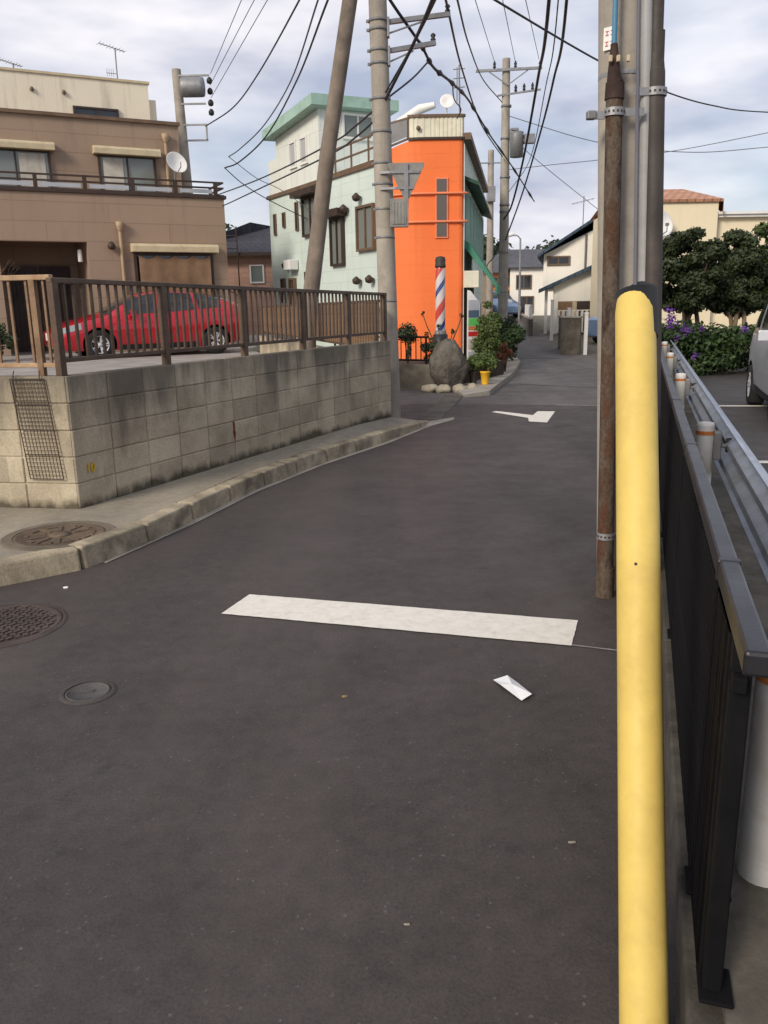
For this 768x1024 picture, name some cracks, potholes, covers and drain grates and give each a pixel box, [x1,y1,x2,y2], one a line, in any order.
manhole cover [0,521,116,551]
manhole cover [58,680,117,706]
manhole cover [0,603,68,648]
